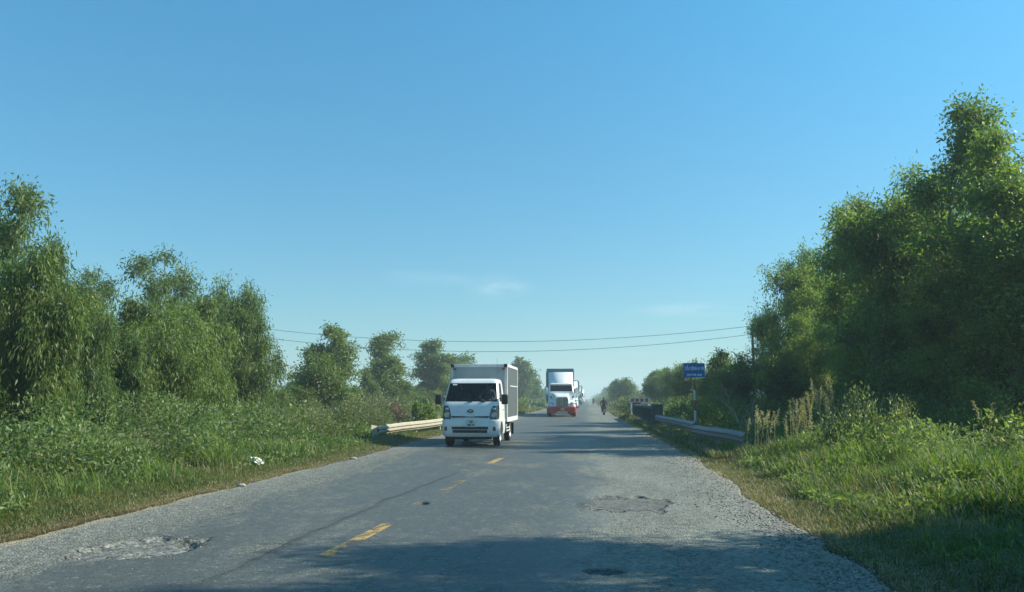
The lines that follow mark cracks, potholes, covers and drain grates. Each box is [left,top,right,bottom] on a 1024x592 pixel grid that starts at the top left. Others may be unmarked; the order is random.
pothole [63,536,210,561]
crack [203,474,453,581]
